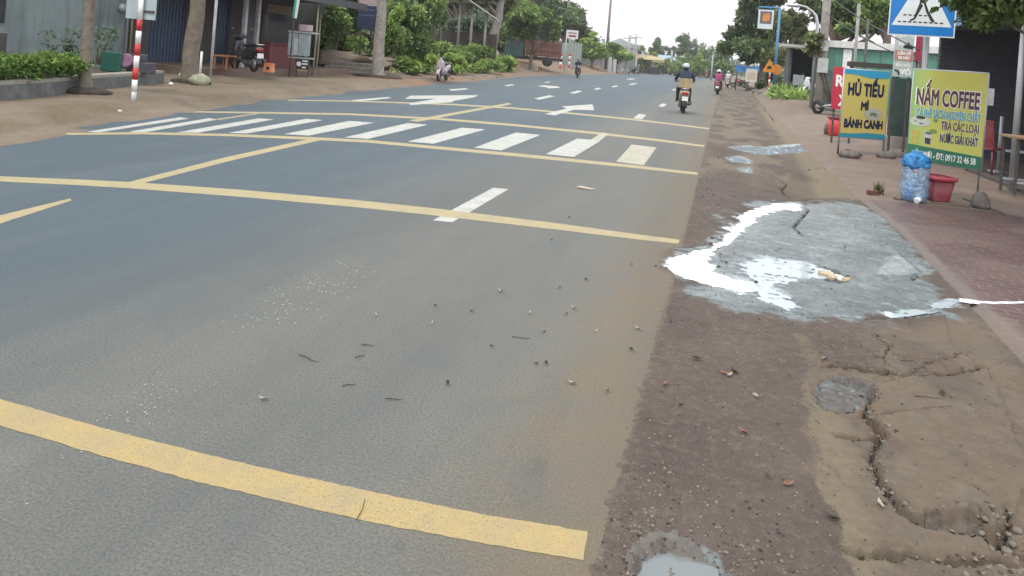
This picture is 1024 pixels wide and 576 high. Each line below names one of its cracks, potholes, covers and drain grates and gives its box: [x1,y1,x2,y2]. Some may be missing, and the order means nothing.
crack [997,509,1012,548]
pothole [622,529,718,576]
crack [883,347,979,376]
crack [760,171,813,234]
crack [858,401,887,498]
